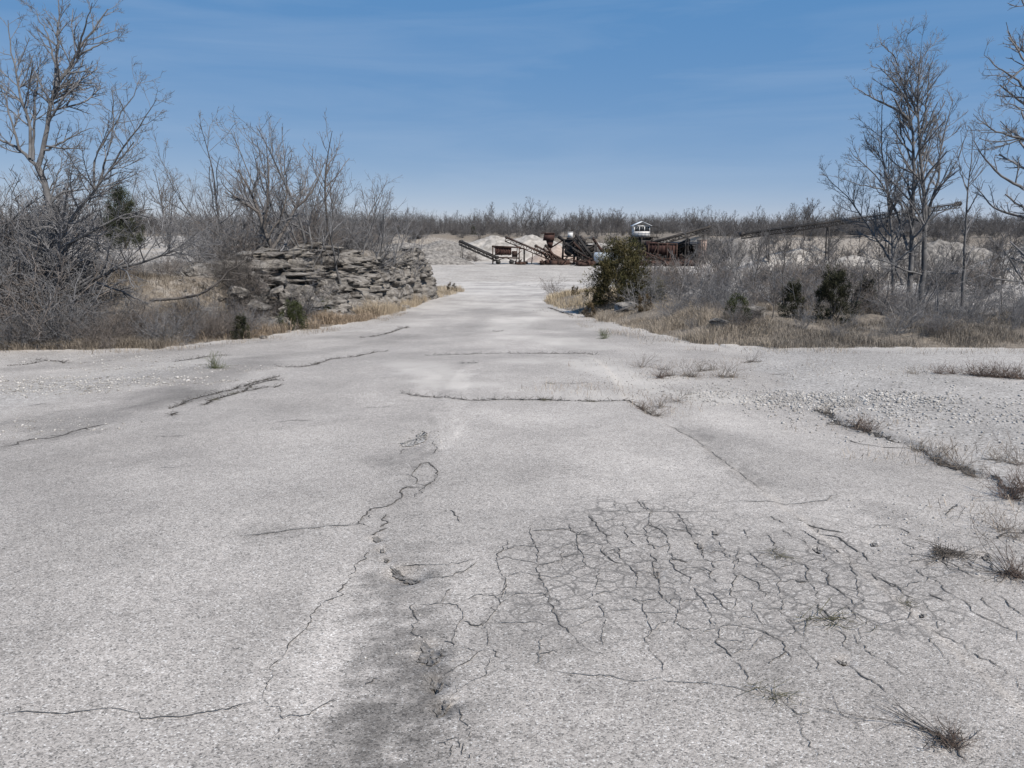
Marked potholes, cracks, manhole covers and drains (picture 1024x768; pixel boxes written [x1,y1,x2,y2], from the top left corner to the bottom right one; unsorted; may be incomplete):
crack [166,326,408,416]
crack [241,441,438,536]
crack [376,382,1024,757]
crack [263,552,368,739]
crack [4,701,264,719]
